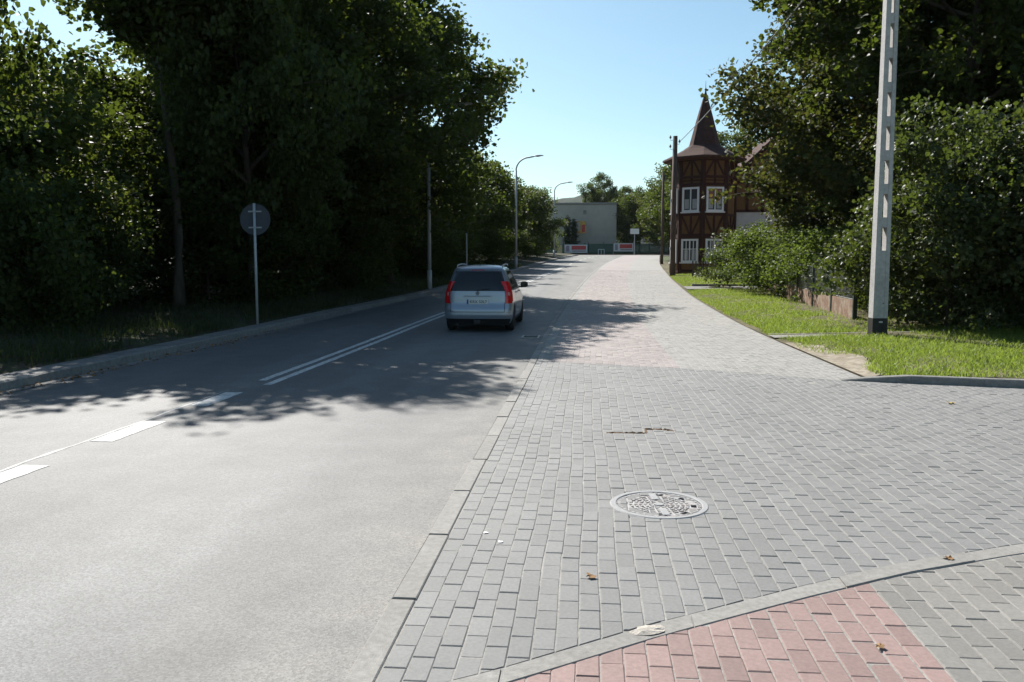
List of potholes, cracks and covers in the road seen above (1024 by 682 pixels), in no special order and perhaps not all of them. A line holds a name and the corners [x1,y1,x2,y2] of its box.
manhole cover [610,490,709,520]
